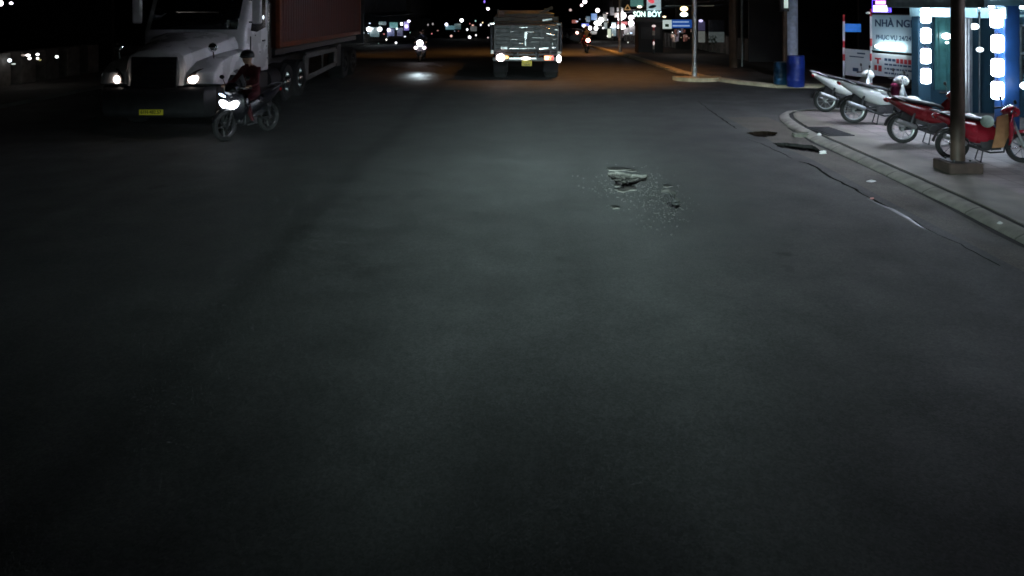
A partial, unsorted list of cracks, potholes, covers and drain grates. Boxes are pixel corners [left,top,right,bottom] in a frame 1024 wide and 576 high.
crack [699,102,1000,266]
pothole [607,172,649,188]
pothole [661,189,681,209]
